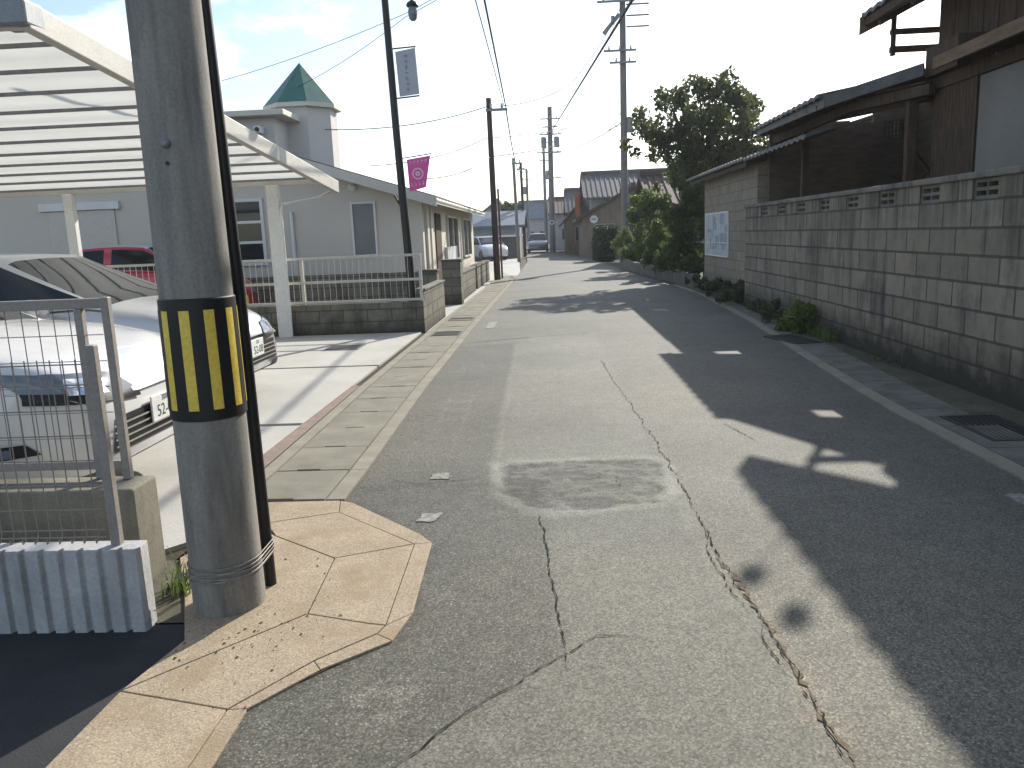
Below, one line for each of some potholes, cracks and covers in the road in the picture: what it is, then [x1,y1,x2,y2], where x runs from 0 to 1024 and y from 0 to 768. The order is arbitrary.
crack [603,362,858,768]
crack [394,516,657,767]
drain grate [764,334,823,344]
drain grate [939,414,1024,441]
